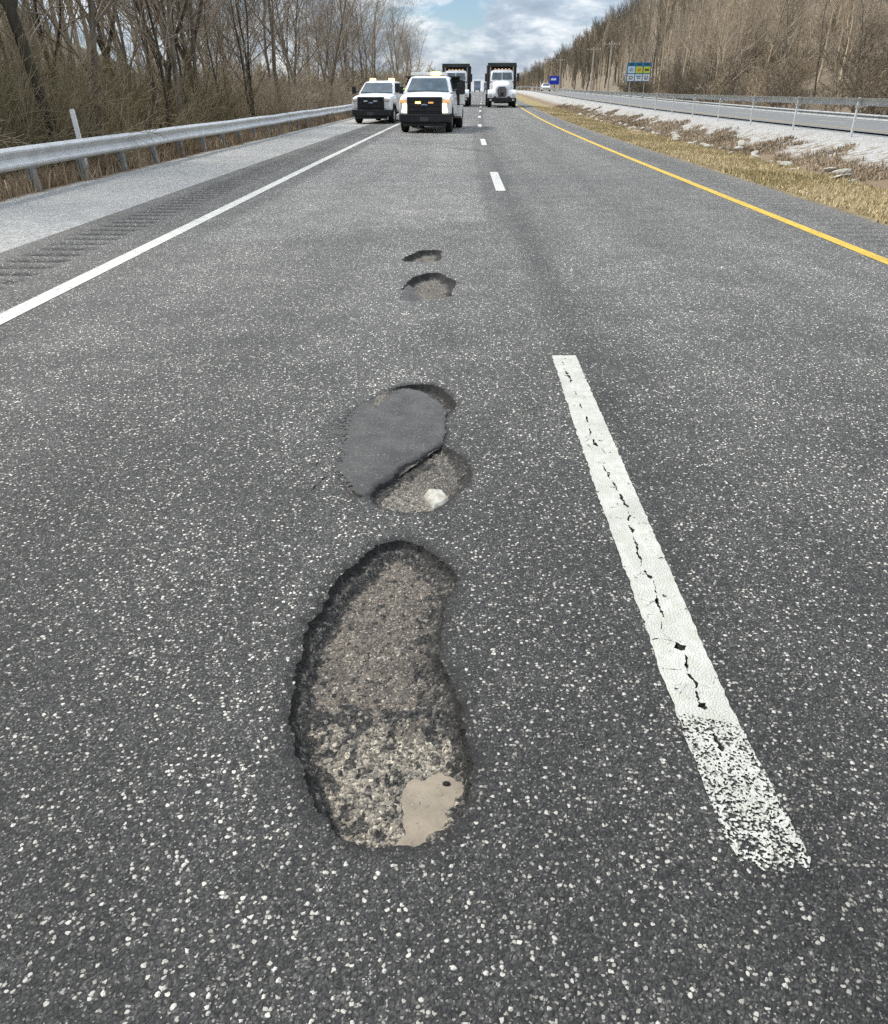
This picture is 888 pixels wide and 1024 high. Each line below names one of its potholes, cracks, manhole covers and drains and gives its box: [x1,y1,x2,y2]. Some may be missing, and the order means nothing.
pothole [288,540,475,849]
pothole [370,445,472,513]
pothole [402,250,443,262]
pothole [400,273,457,302]
